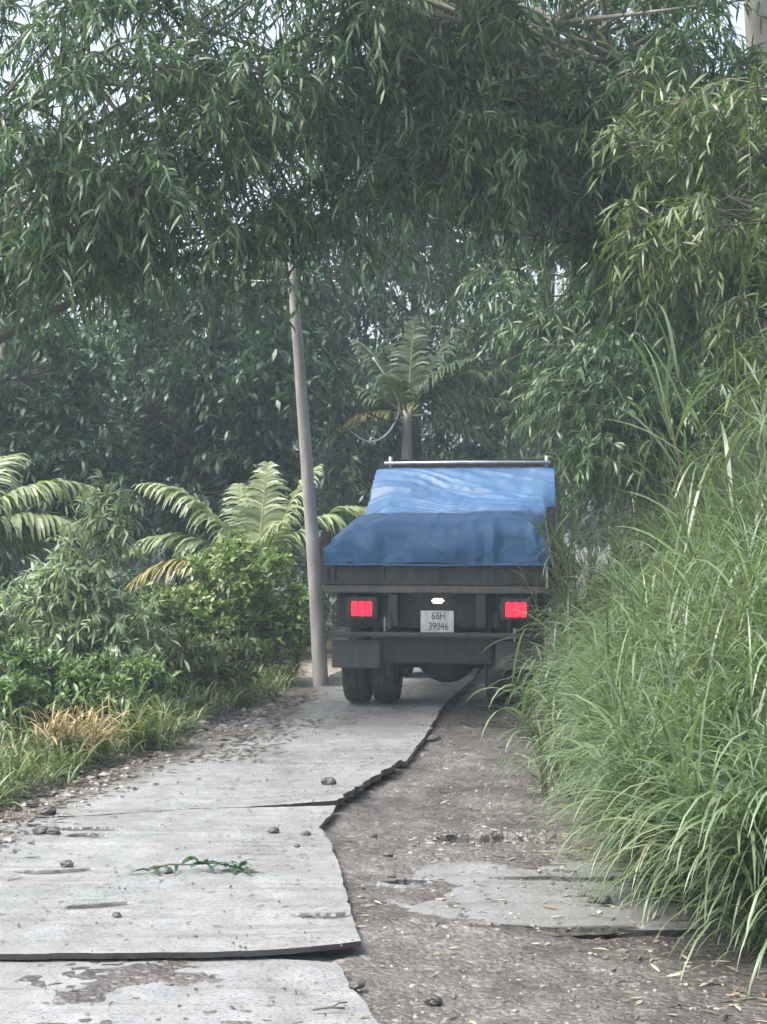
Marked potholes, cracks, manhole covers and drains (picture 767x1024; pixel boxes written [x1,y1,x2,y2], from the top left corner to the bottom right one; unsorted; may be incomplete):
crack [472,925,640,939]
pothole [376,878,434,888]
